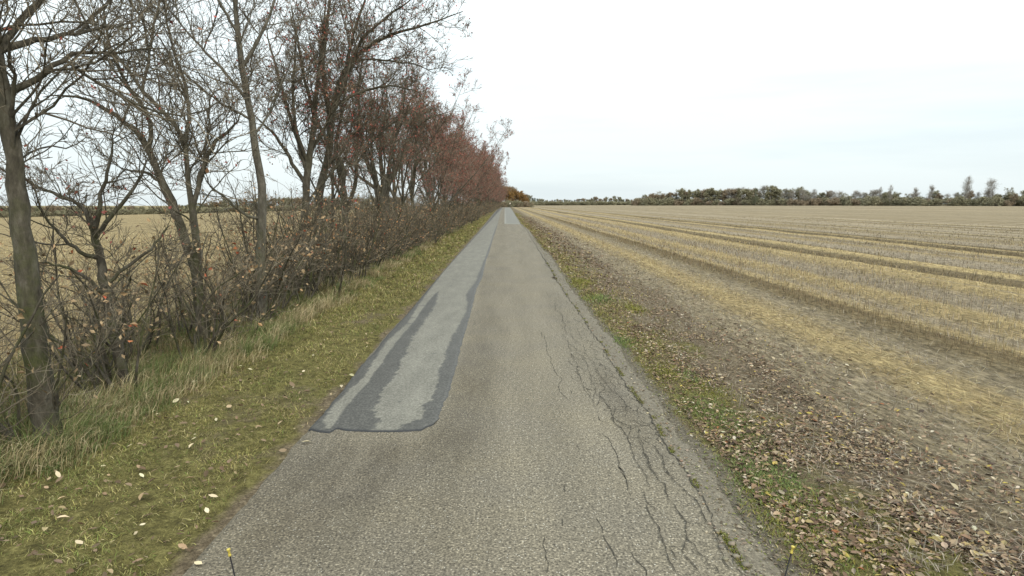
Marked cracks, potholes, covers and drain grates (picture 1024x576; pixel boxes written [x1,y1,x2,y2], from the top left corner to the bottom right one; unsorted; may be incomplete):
crack [541,282,732,575]
